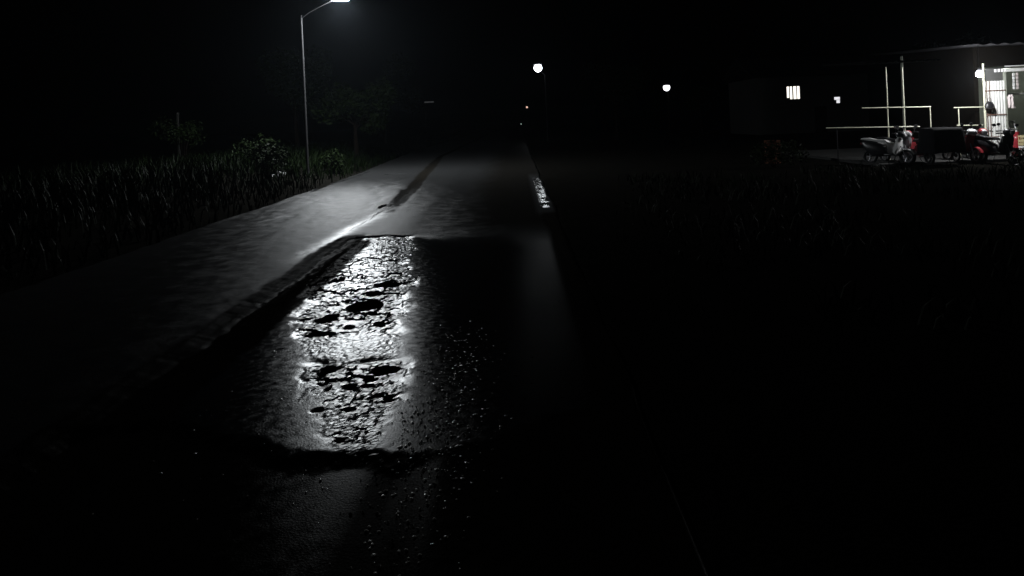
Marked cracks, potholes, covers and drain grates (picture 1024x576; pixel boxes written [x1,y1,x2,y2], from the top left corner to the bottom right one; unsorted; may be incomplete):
pothole [345,299,385,313]
pothole [312,314,341,324]
pothole [317,365,337,378]
pothole [369,365,401,377]
